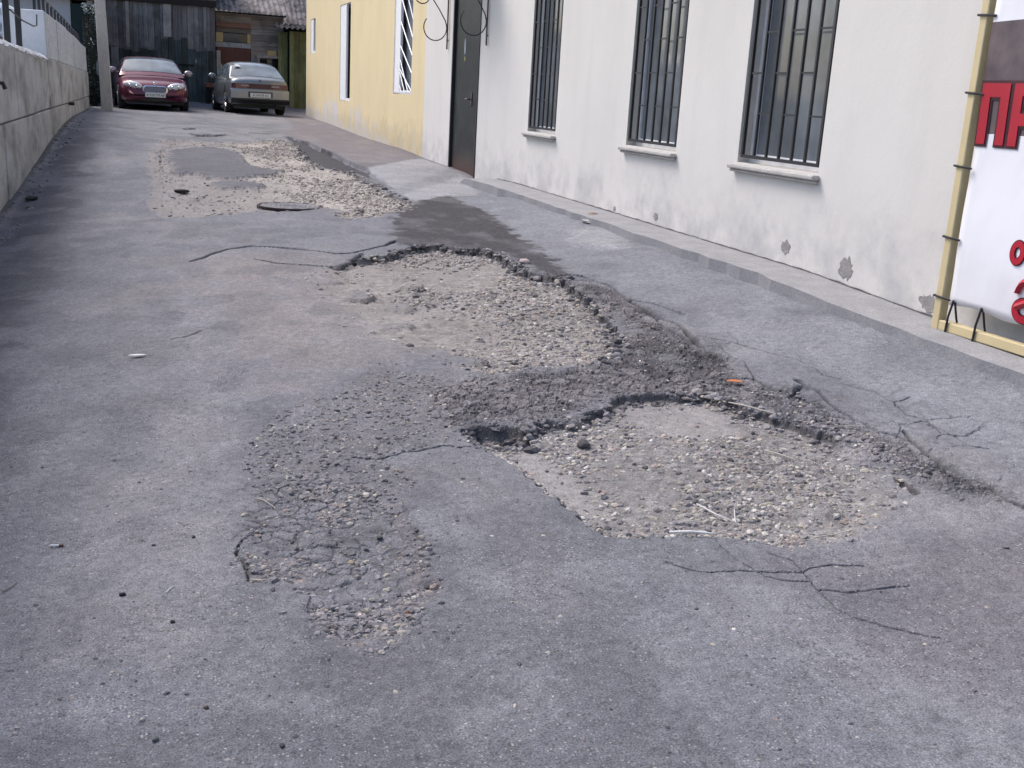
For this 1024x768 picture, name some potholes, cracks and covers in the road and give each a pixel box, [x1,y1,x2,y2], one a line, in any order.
manhole cover [257,202,323,212]
pothole [143,138,418,222]
crack [233,532,263,583]
crack [351,272,1024,519]
pothole [458,393,914,552]
crack [188,240,397,271]
pothole [301,245,630,375]
crack [666,545,941,639]
